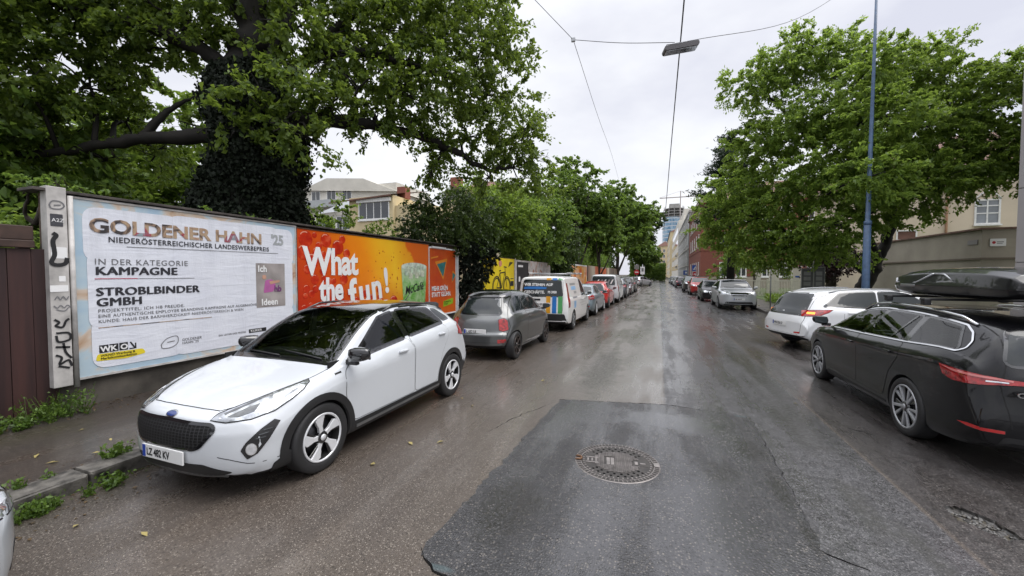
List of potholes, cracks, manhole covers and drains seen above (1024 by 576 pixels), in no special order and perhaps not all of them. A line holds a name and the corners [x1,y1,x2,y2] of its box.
crack [498,399,720,427]
crack [818,548,870,571]
manhole cover [575,444,661,484]
crack [754,424,811,530]
pothole [944,506,1024,542]
